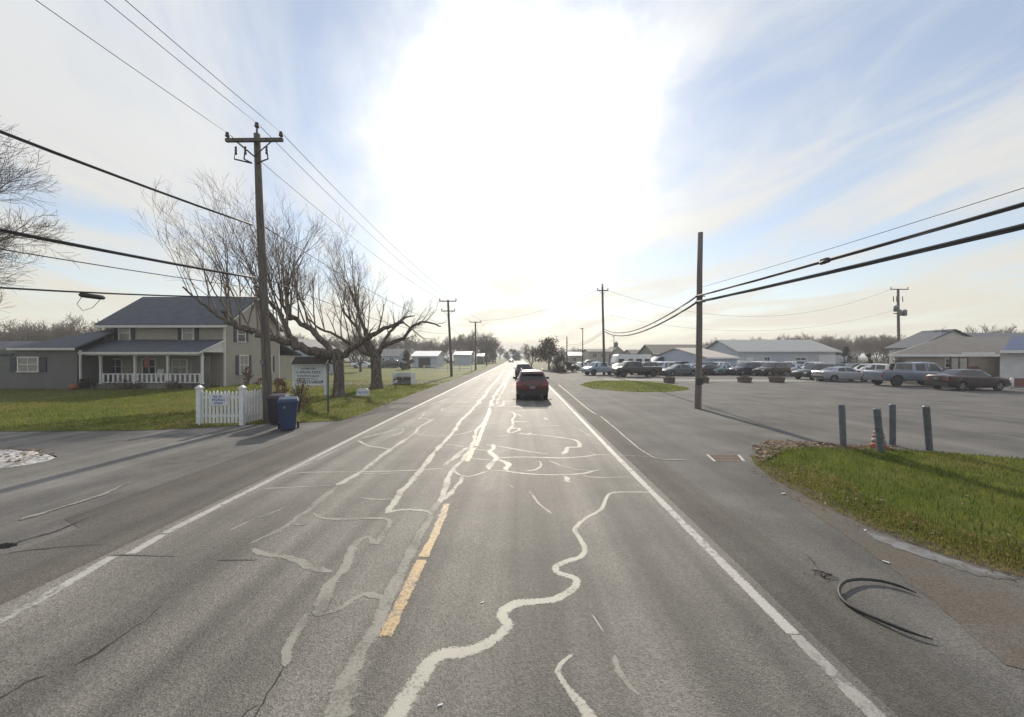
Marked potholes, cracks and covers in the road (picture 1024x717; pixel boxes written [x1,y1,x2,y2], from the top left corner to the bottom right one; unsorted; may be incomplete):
drain grate [706,454,745,462]
crack [242,667,284,717]
crack [0,675,46,698]
crack [75,606,161,666]
